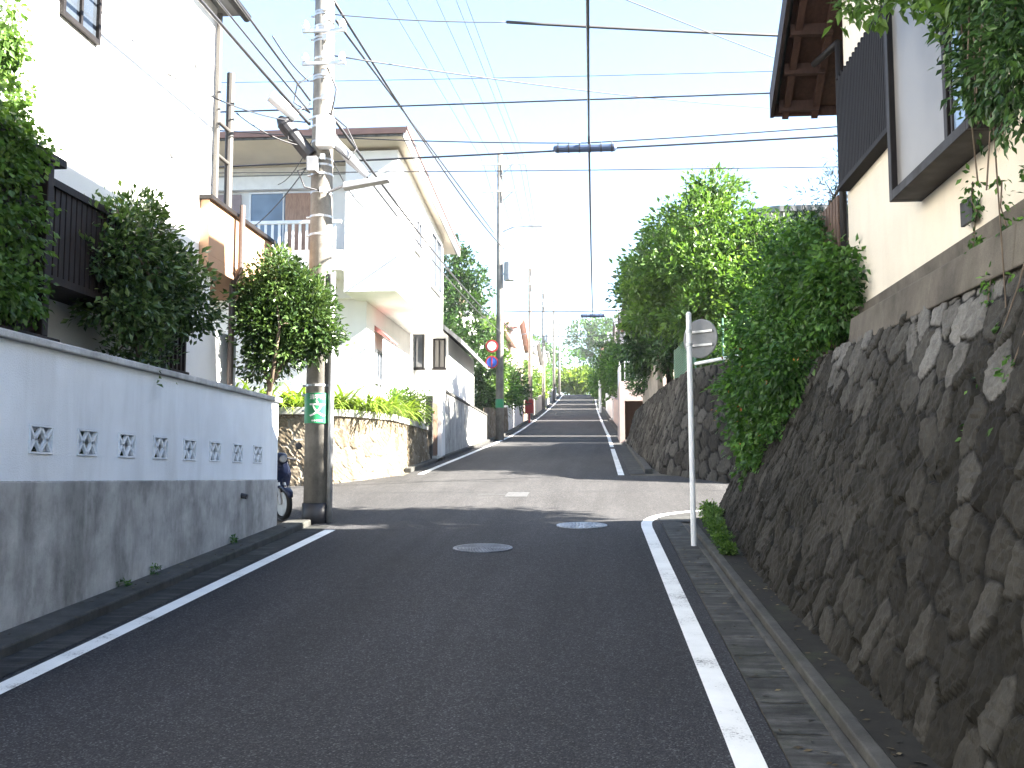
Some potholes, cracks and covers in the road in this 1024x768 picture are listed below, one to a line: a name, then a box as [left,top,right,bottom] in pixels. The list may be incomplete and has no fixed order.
manhole cover [453,543,513,553]
